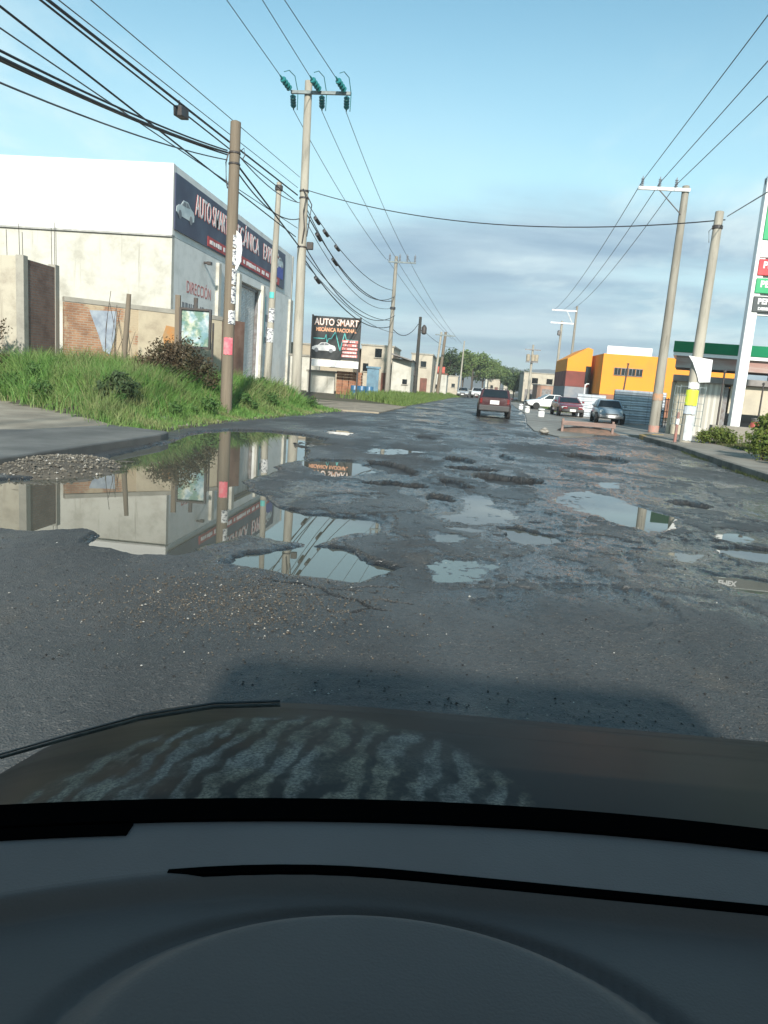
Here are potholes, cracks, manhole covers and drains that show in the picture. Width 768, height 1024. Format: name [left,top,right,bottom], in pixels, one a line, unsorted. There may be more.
pothole [467,471,551,487]
pothole [702,543,768,564]
pothole [420,493,465,503]
pothole [650,547,733,568]
pothole [392,551,532,590]
pothole [418,529,482,545]
pothole [427,491,554,527]
pothole [661,499,716,510]
pothole [440,455,485,465]
pothole [701,529,768,546]
pothole [536,488,695,535]
pothole [0,428,410,585]
